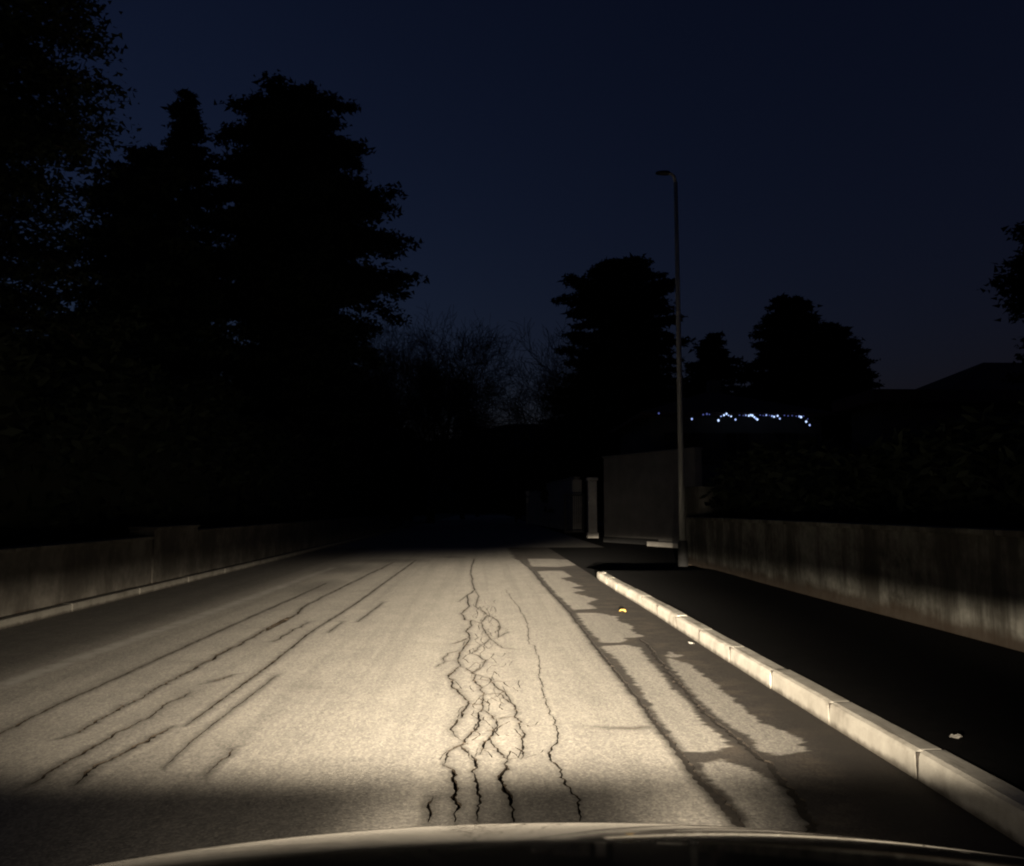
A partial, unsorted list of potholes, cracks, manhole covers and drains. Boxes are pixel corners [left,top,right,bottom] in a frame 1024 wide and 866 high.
crack [30,560,416,785]
crack [426,560,582,822]
